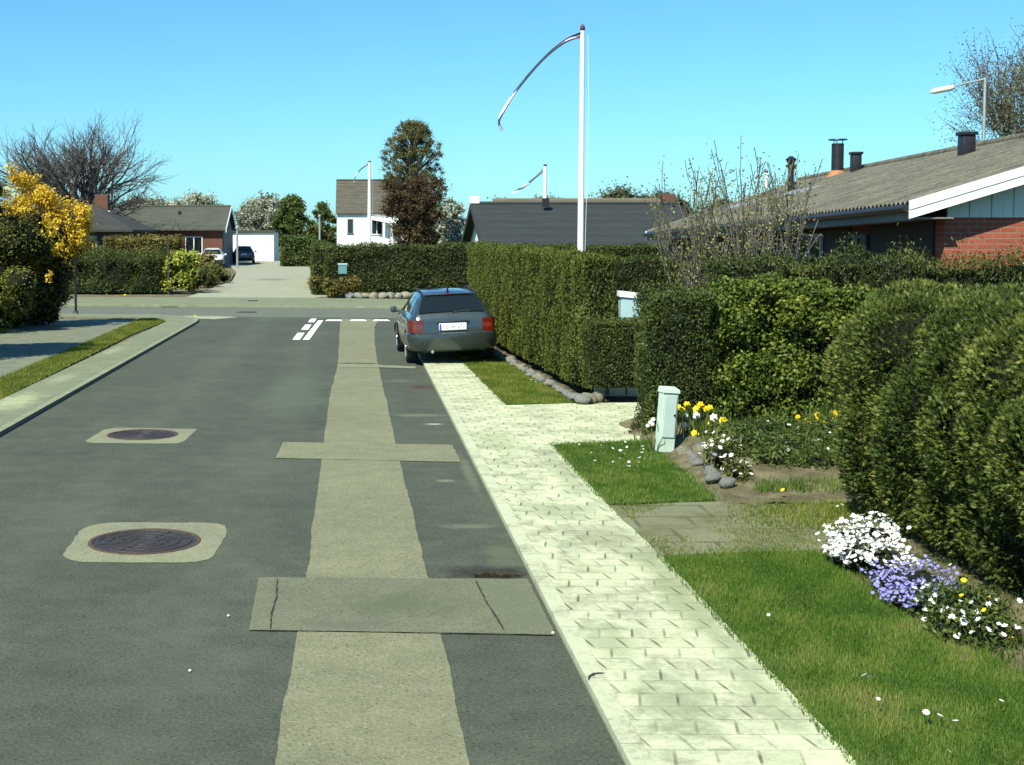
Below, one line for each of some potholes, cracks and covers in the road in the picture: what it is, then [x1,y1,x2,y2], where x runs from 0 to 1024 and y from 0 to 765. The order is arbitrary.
pothole [467,570,526,578]
manhole cover [63,522,227,563]
crack [270,578,278,629]
manhole cover [86,428,197,444]
